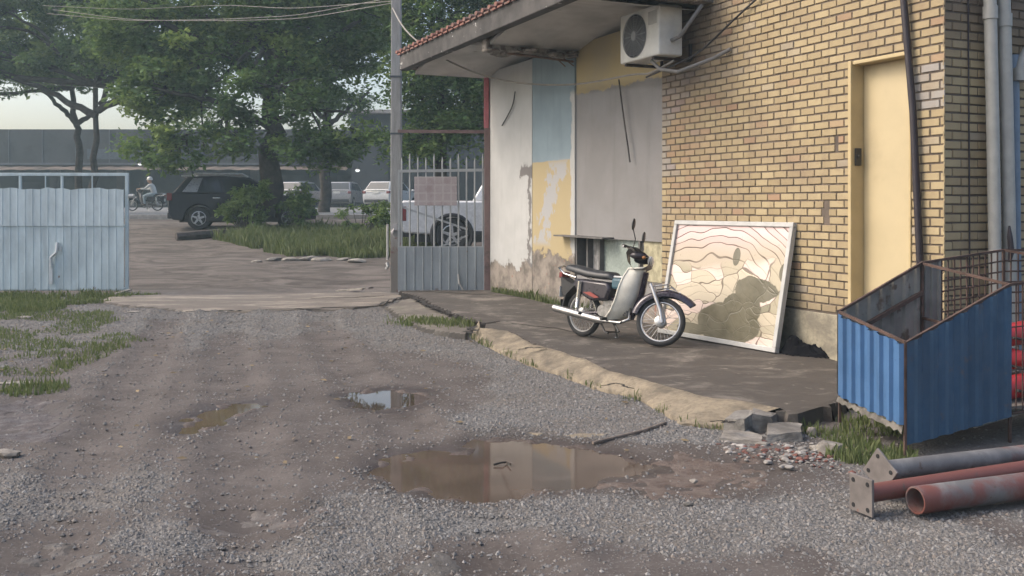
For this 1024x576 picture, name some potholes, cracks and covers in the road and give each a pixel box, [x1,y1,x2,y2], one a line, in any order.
pothole [179,403,268,434]
pothole [367,437,653,504]
pothole [342,388,430,411]
